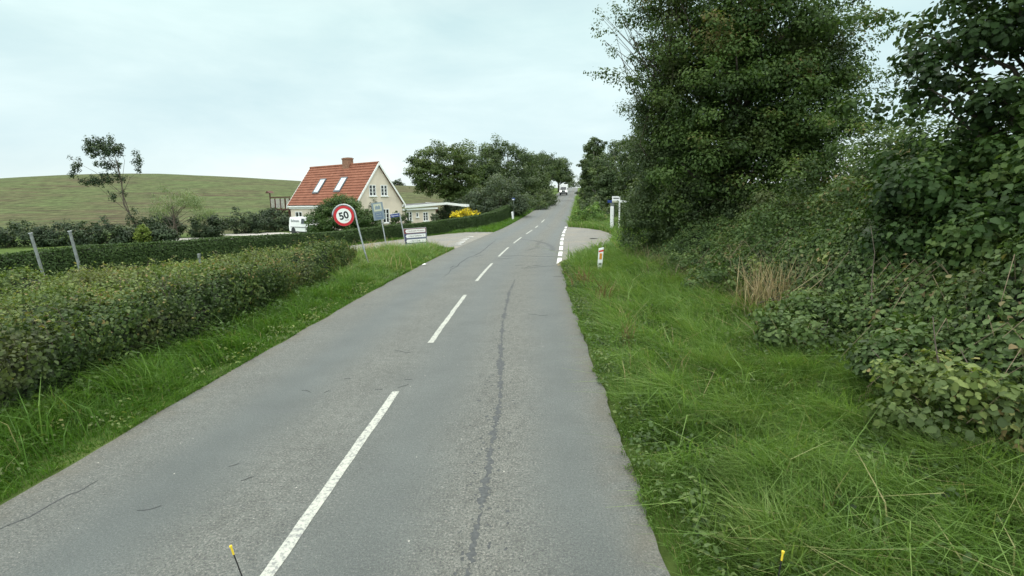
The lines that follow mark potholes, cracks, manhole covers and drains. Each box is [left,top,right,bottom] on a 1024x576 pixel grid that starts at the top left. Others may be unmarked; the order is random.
crack [0,480,98,529]
crack [448,243,560,277]
